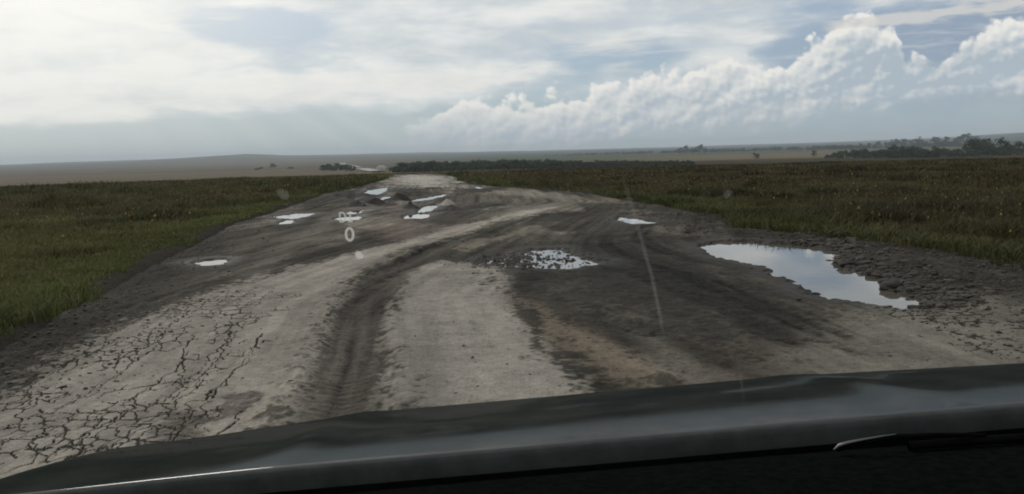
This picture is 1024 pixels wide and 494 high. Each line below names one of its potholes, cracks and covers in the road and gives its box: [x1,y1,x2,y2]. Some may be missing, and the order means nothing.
crack [0,287,300,468]
pothole [414,203,439,213]
pothole [189,257,232,266]
pothole [398,211,436,219]
pothole [696,239,933,309]
pothole [471,246,612,269]
pothole [361,187,390,195]
pothole [612,215,666,224]
pothole [410,193,450,201]
